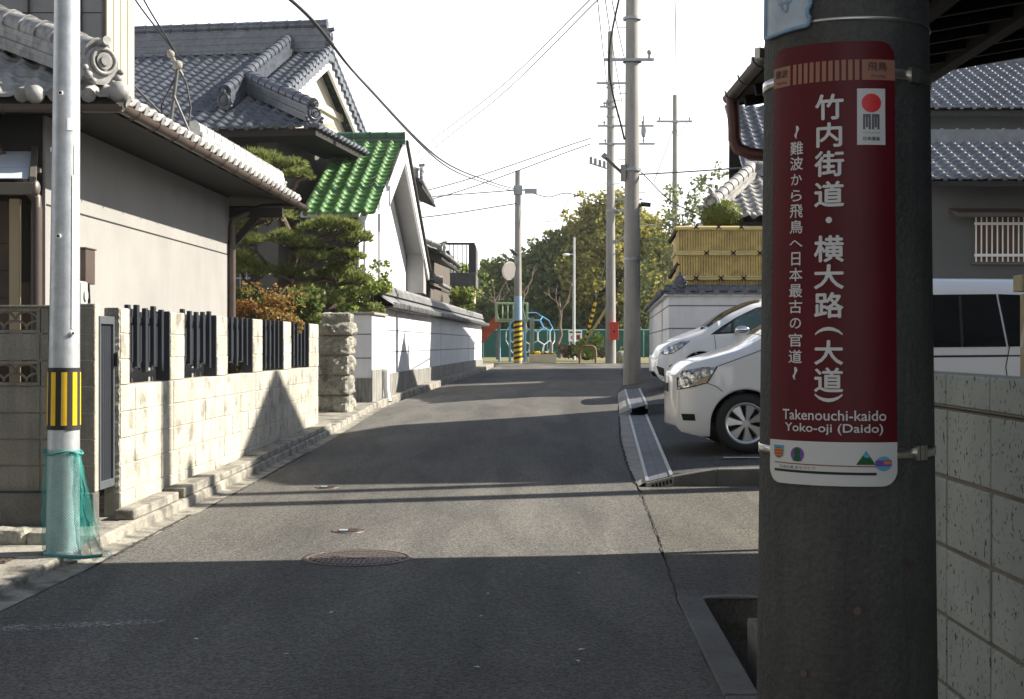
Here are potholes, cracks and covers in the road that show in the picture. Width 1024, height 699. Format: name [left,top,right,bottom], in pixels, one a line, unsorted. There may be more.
crack [618,416,677,596]
manhole cover [303,549,412,567]
